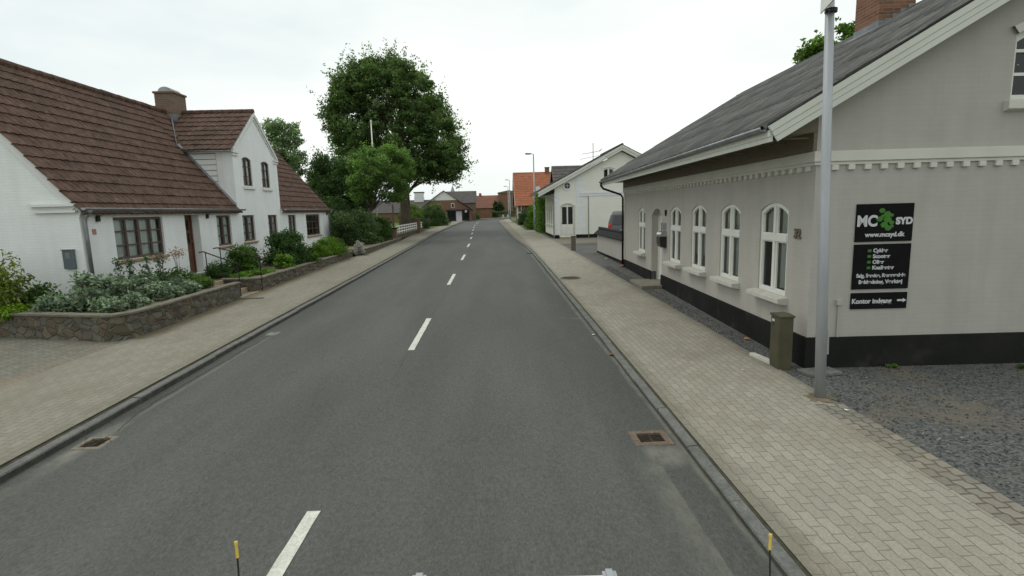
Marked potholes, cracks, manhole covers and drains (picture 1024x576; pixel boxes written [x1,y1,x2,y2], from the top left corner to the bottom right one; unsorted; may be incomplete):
drain grate [627,430,675,446]
drain grate [70,436,119,450]
